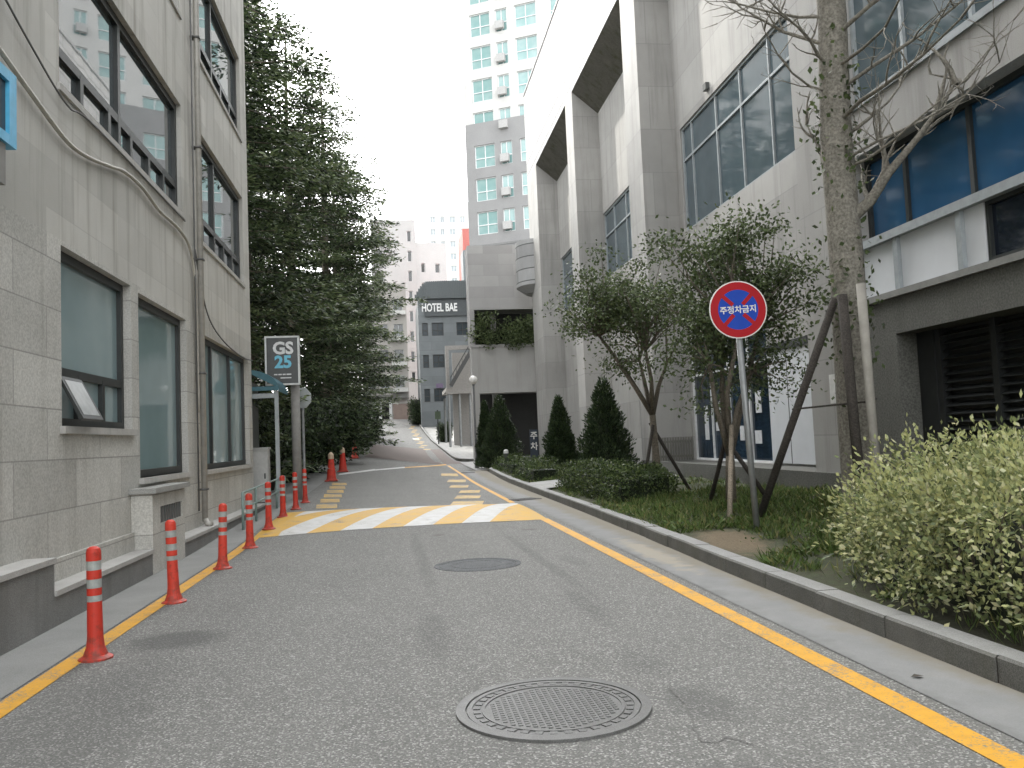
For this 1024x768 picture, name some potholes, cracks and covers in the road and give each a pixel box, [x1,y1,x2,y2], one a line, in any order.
crack [665,682,768,745]
manhole cover [434,558,521,572]
manhole cover [456,677,652,743]
